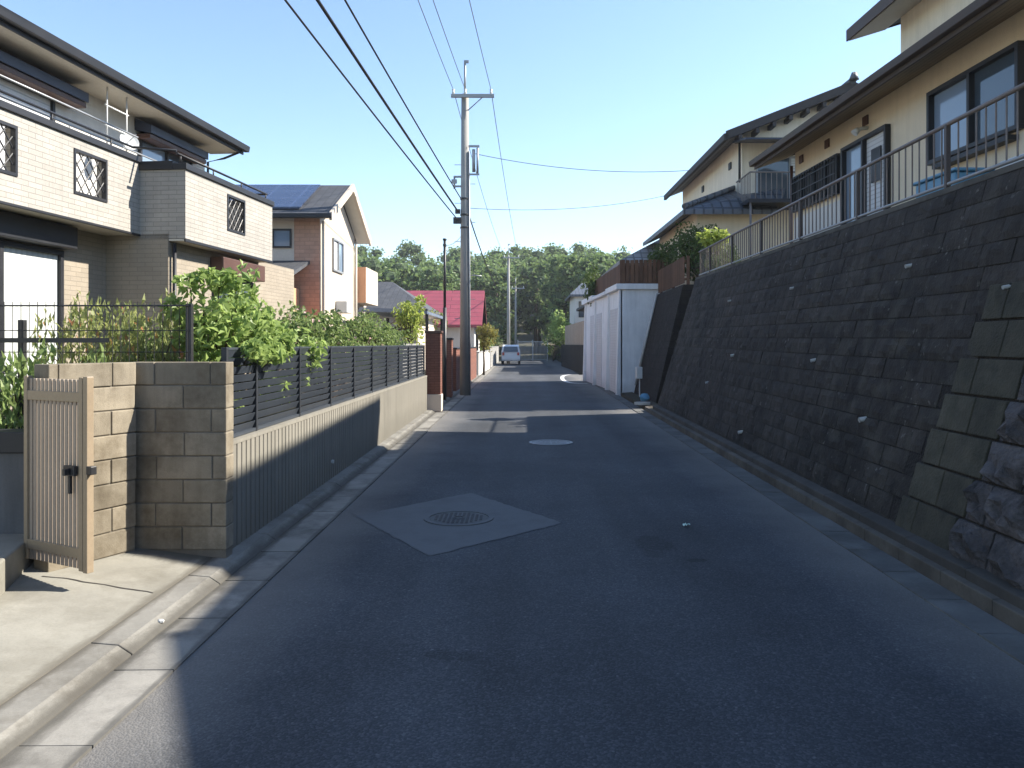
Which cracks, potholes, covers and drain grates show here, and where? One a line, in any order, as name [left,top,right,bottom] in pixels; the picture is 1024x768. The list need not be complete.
manhole cover [424,510,494,526]
